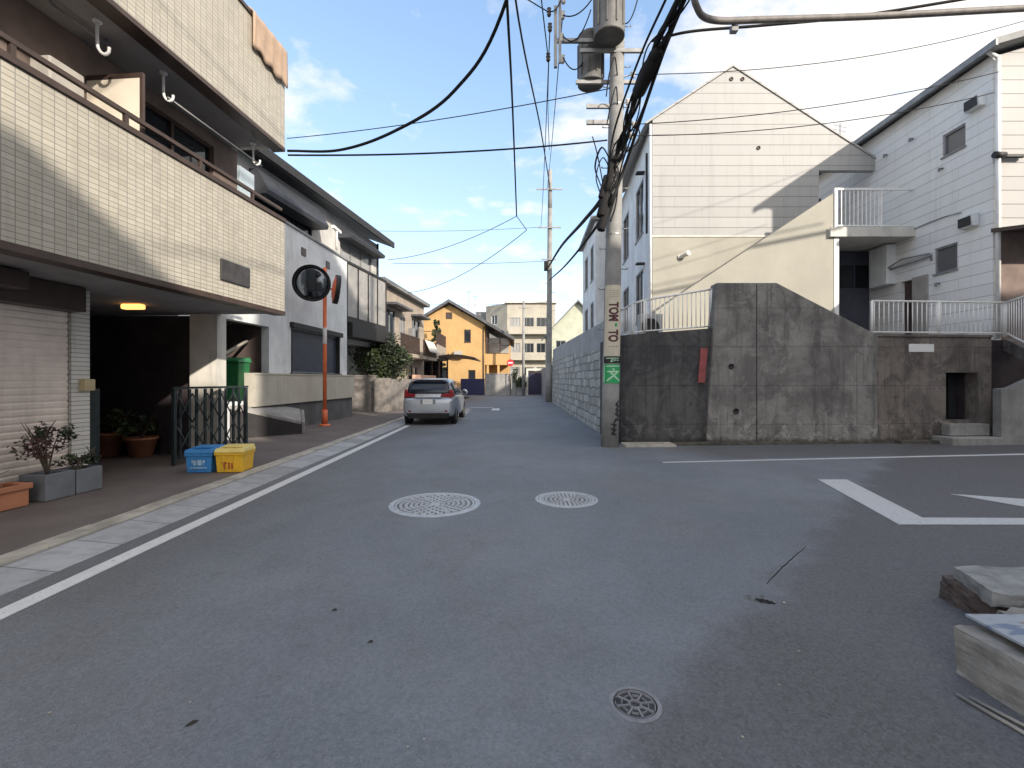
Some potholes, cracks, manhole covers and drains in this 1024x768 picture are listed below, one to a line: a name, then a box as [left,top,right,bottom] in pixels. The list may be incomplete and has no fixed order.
crack [767,545,807,584]
pothole [743,594,776,605]
manhole cover [388,493,481,517]
manhole cover [535,491,598,508]
